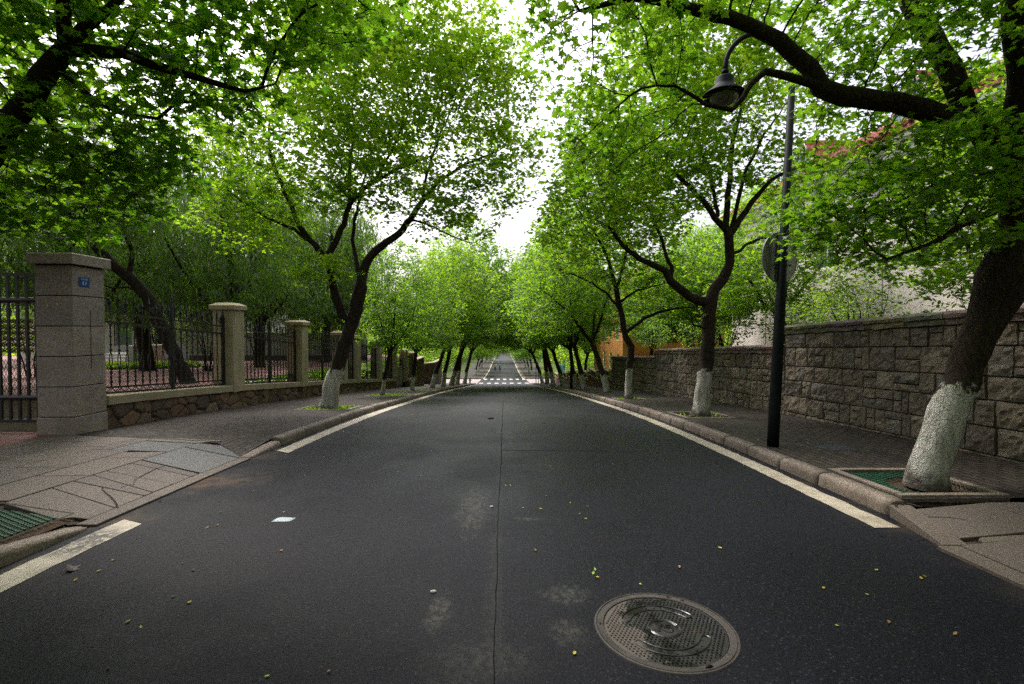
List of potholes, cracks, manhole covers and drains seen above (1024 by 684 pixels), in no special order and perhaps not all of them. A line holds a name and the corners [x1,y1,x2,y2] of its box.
crack [102,466,163,507]
manhole cover [594,593,741,676]
